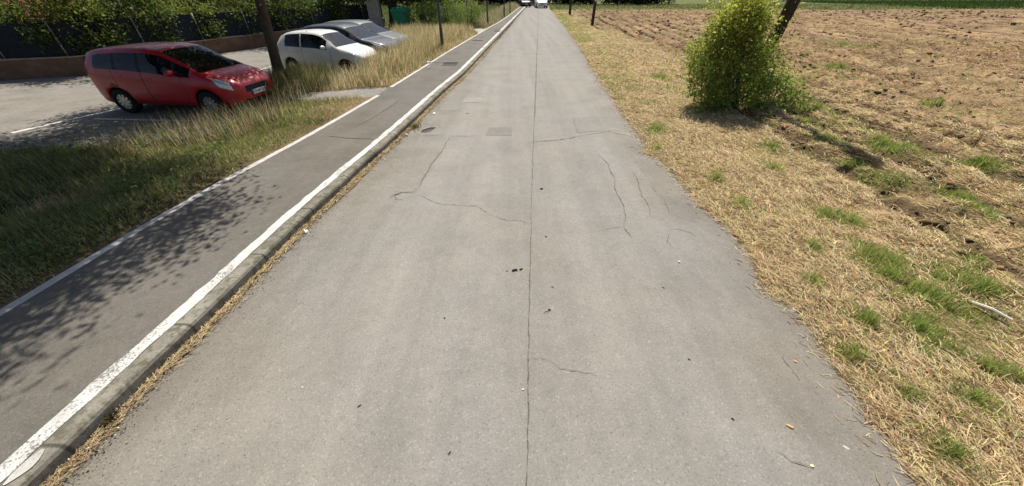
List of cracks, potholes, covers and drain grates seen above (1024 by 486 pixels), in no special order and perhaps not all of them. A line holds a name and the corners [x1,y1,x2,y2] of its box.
crack [391,144,476,206]
crack [599,155,669,236]
